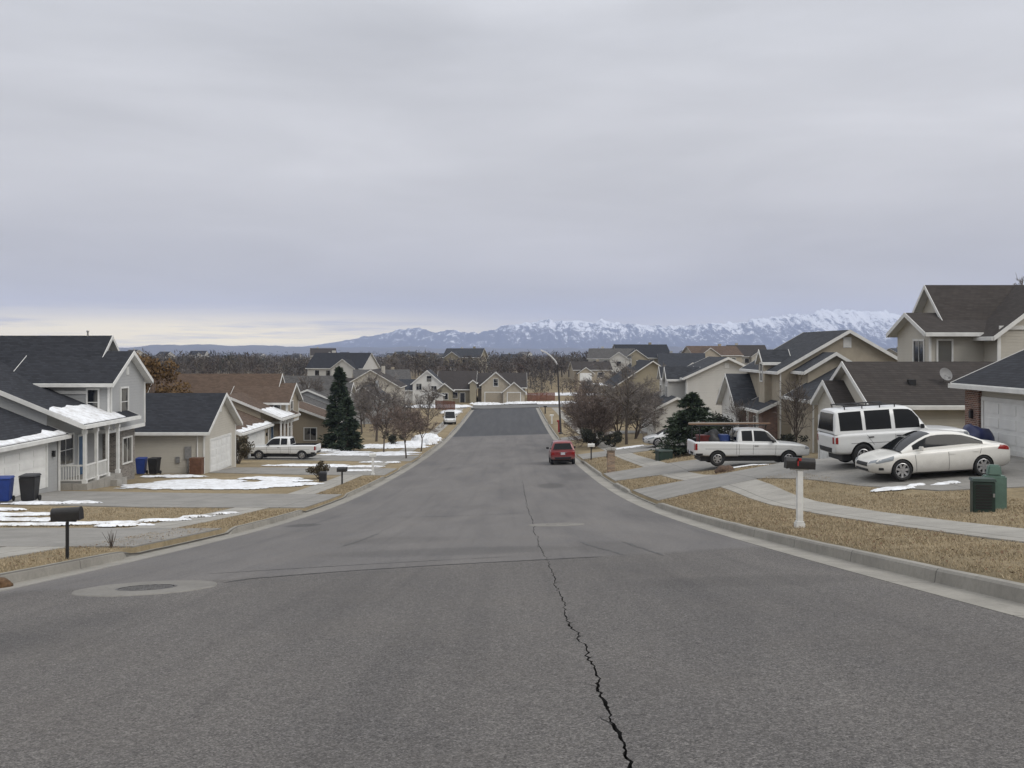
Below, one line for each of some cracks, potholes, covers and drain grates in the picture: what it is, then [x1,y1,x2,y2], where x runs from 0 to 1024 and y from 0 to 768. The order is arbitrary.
crack [433,480,633,768]
manhole cover [71,580,217,597]
